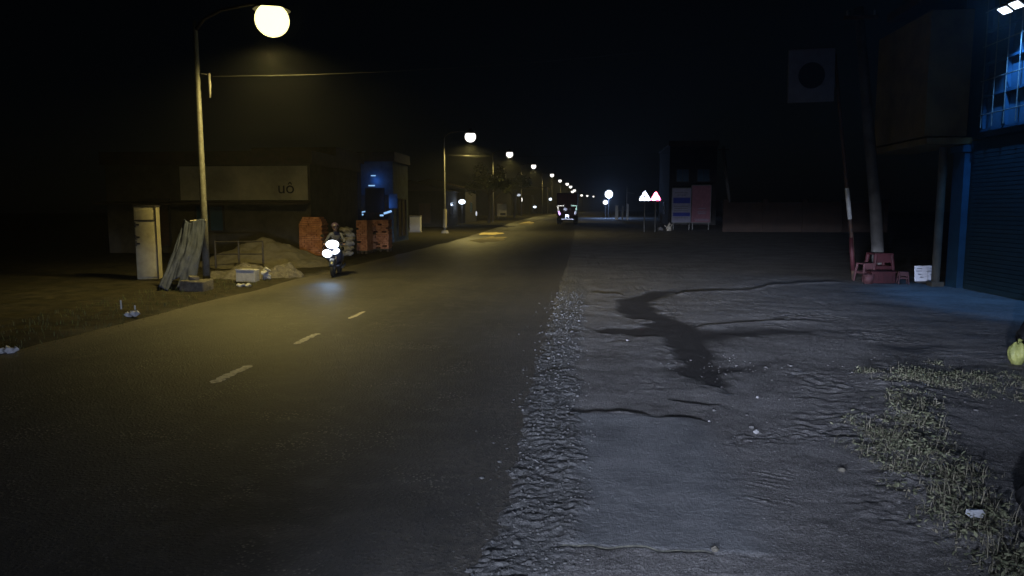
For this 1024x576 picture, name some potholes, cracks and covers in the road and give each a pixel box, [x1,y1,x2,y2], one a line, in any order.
crack [553,544,712,553]
